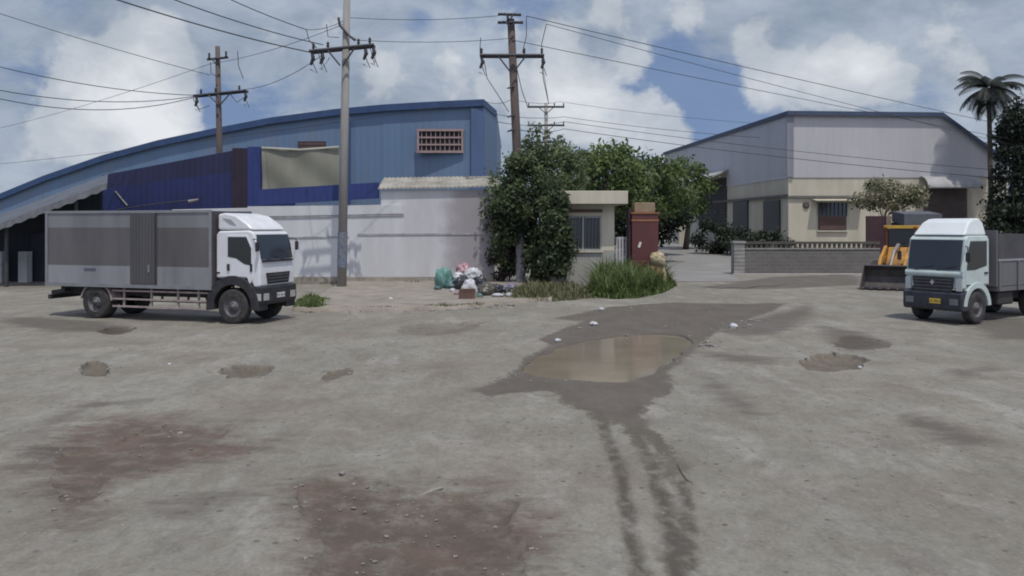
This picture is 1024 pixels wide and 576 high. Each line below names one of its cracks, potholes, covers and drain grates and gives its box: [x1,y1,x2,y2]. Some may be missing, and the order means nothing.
pothole [521,333,694,371]
pothole [798,353,871,372]
pothole [96,327,137,335]
pothole [321,368,354,381]
pothole [217,364,276,379]
pothole [830,335,893,350]
pothole [77,360,111,377]
